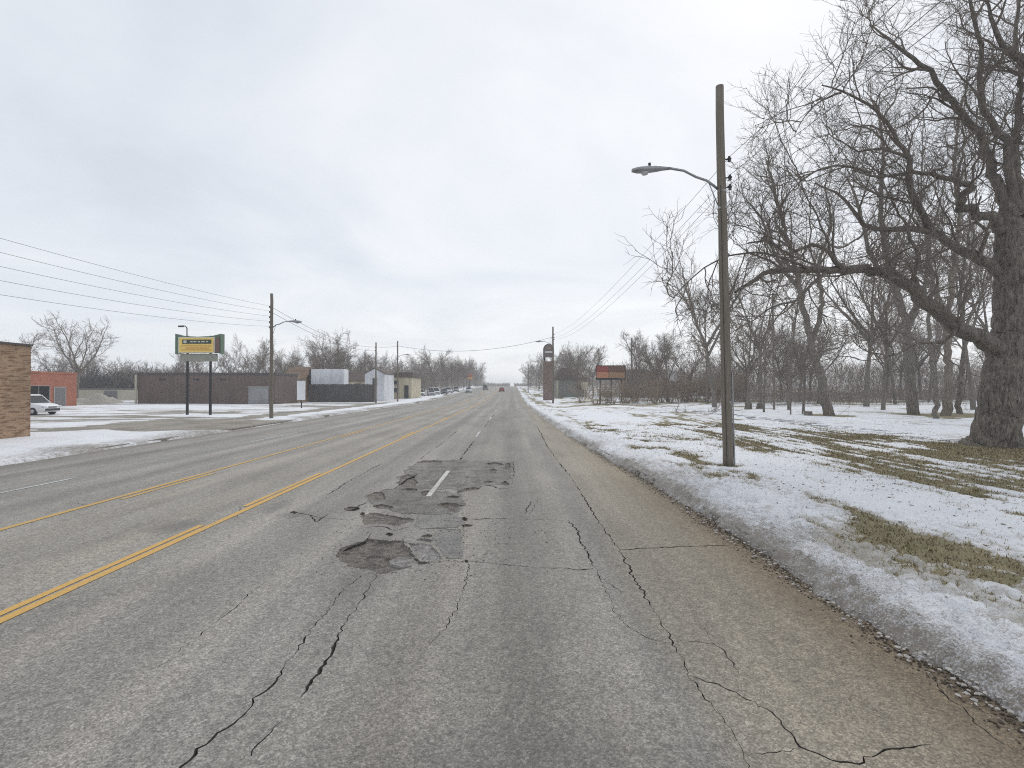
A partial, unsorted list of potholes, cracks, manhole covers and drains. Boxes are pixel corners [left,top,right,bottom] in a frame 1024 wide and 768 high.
pothole [438,502,464,512]
crack [925,670,1006,745]
crack [158,575,377,768]
pothole [335,539,428,574]
pothole [360,513,414,526]
crack [420,522,930,765]
crack [290,465,407,552]
